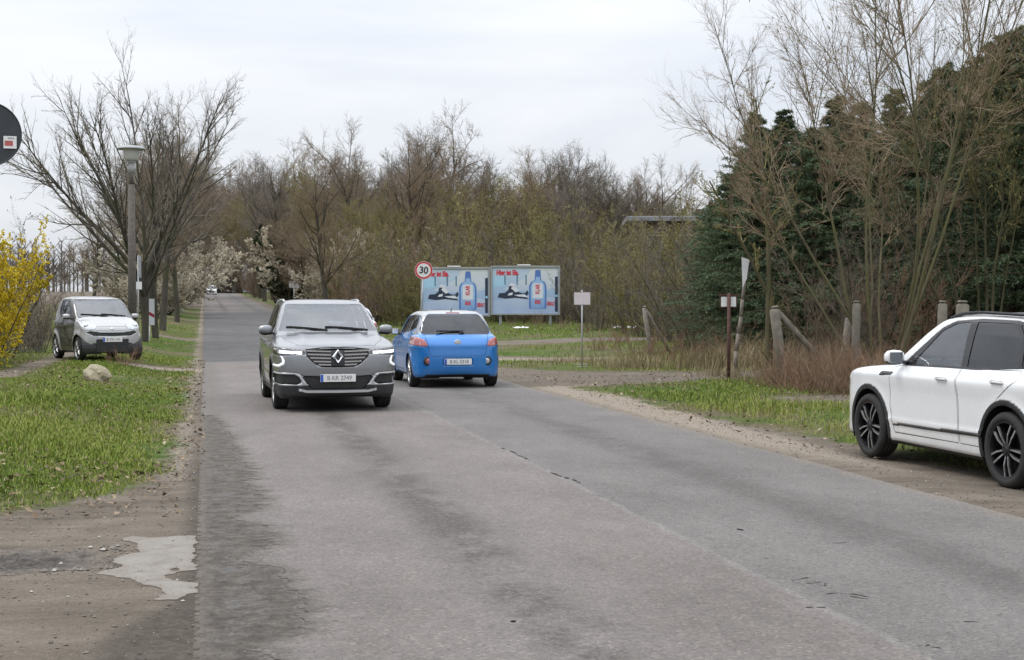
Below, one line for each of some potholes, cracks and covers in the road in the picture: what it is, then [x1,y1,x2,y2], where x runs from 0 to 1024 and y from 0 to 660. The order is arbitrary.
crack [792,577,867,608]
